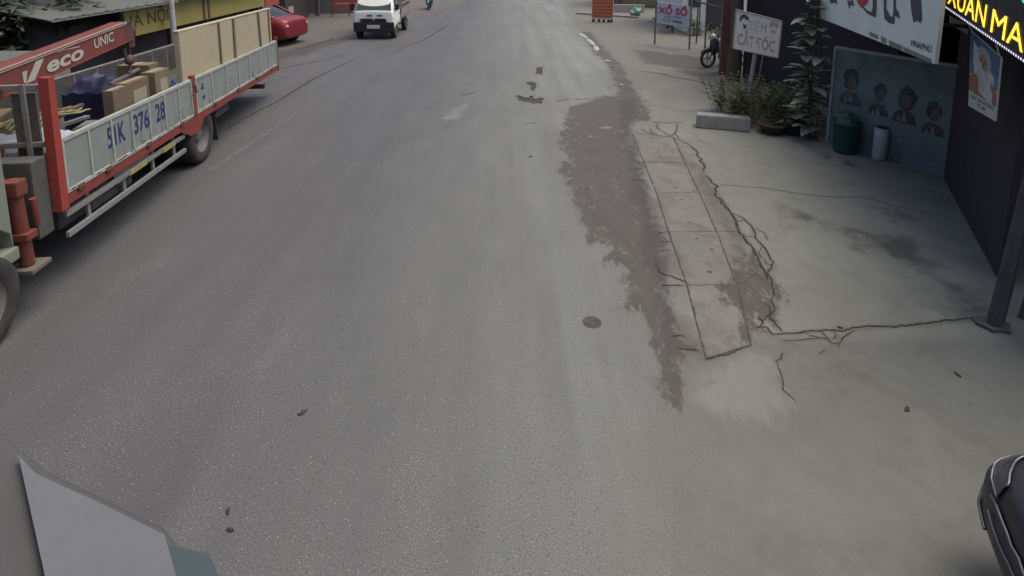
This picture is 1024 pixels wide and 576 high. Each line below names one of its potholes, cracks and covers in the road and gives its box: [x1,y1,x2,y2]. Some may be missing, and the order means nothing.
pothole [513,94,547,104]
manhole cover [582,316,602,329]
crack [636,122,968,400]
